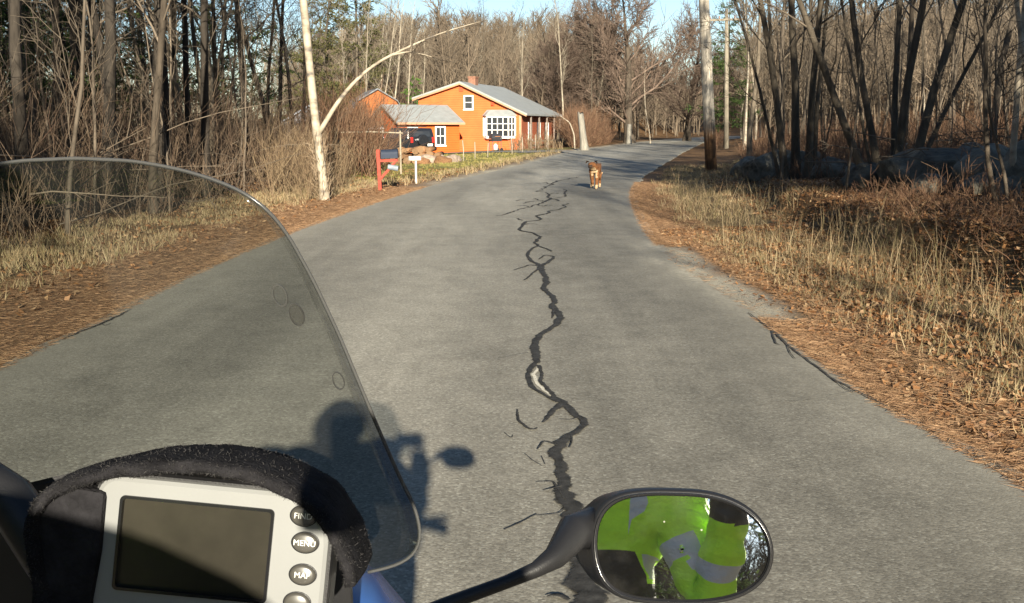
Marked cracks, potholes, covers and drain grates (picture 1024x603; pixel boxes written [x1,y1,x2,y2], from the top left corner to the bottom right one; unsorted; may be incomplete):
crack [748,312,886,406]
crack [497,177,577,216]
